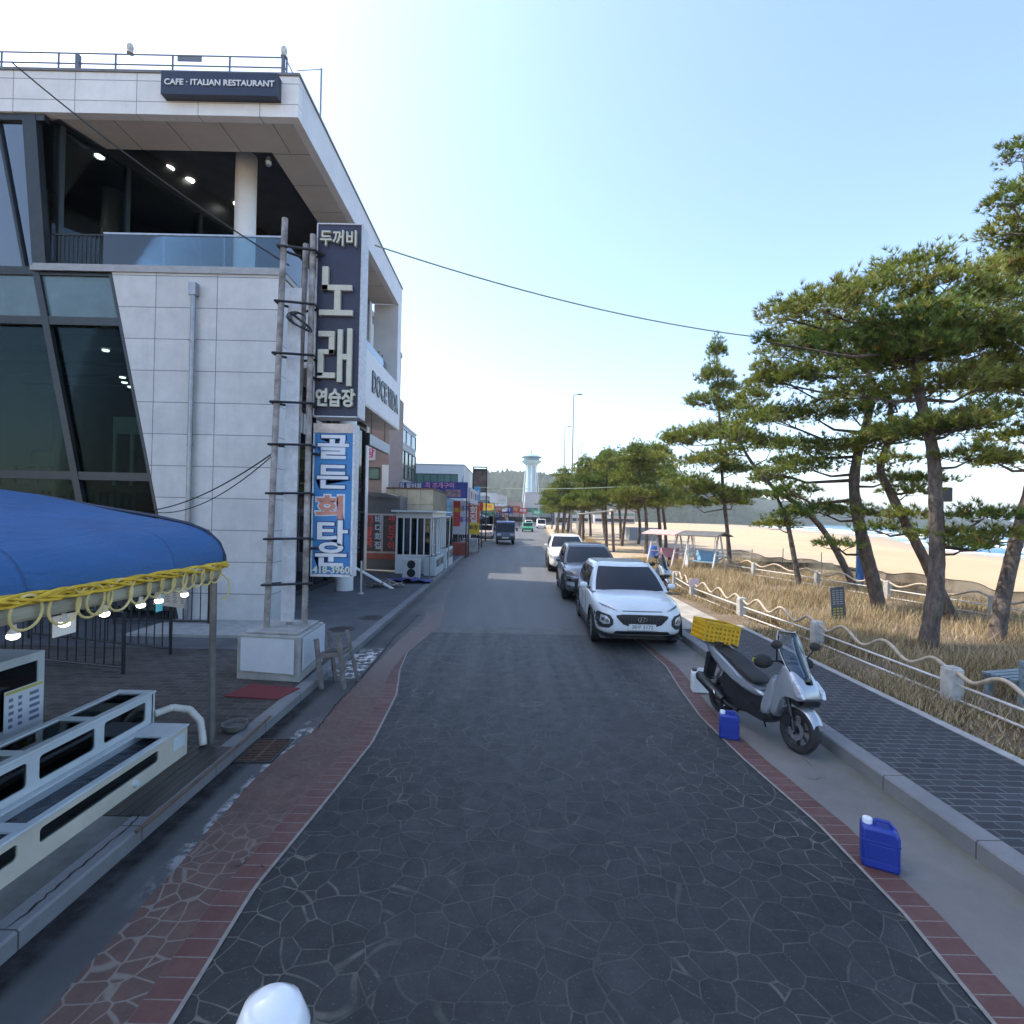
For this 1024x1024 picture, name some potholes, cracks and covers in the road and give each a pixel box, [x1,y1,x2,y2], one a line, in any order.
drain grate [232,738,294,764]
